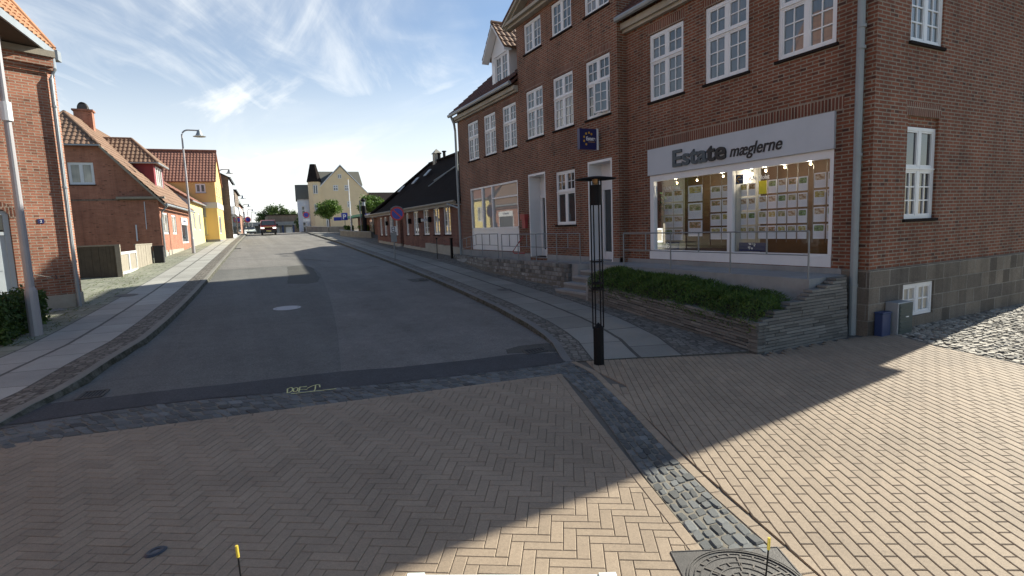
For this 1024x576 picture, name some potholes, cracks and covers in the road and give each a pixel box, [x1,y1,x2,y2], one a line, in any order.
manhole cover [670,546,803,576]
